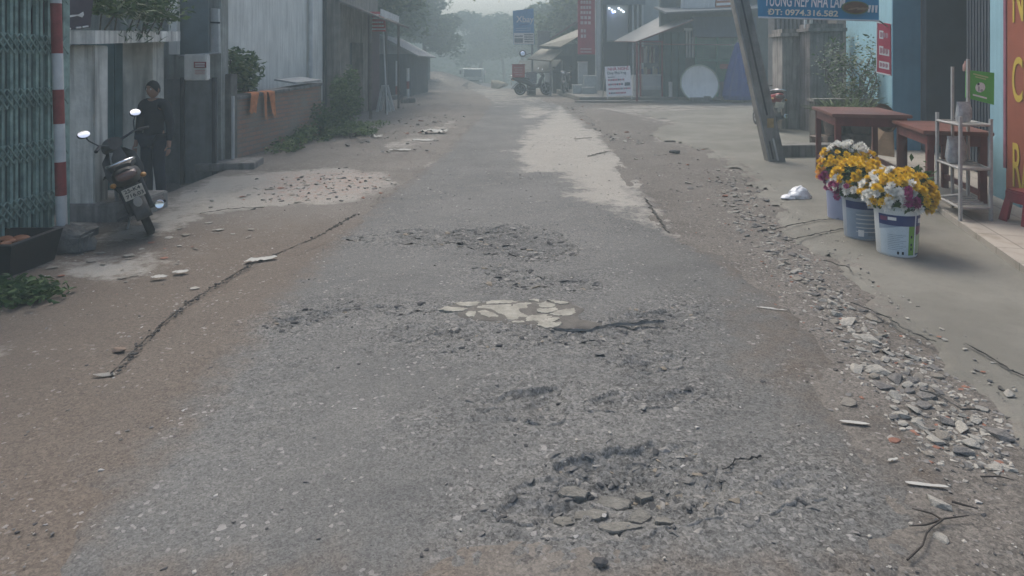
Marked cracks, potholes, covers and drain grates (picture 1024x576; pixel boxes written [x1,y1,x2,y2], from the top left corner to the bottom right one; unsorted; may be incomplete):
crack [549,320,664,334]
pothole [445,225,584,263]
crack [920,343,1024,410]
pothole [340,229,464,247]
pothole [465,380,581,435]
crack [722,455,762,470]
crack [107,214,360,375]
crack [644,198,670,233]
pothole [479,435,740,554]
